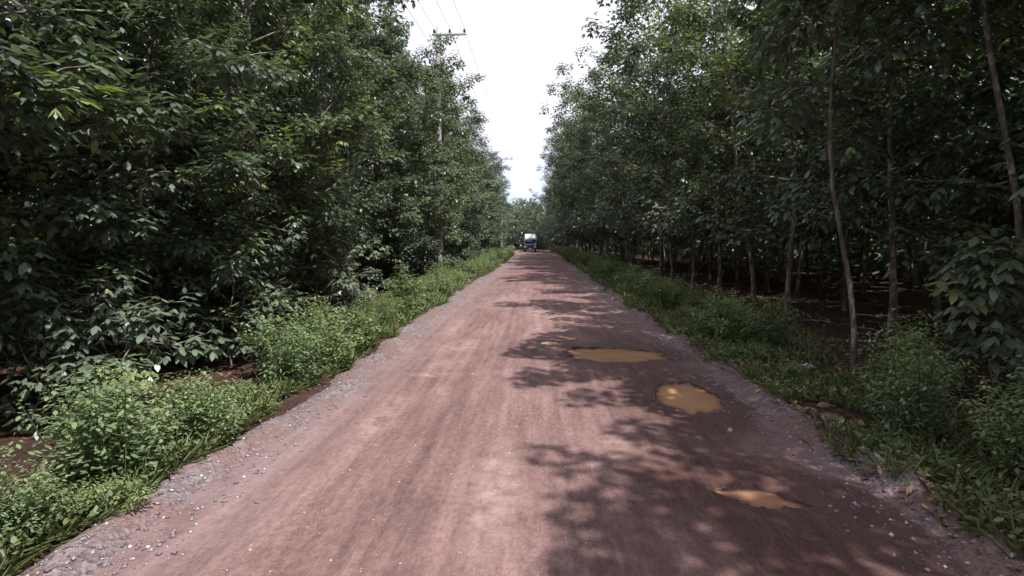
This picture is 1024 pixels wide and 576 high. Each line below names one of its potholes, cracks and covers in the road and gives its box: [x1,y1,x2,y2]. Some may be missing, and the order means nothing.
pothole [654,380,726,415]
pothole [563,346,674,363]
pothole [712,484,813,510]
